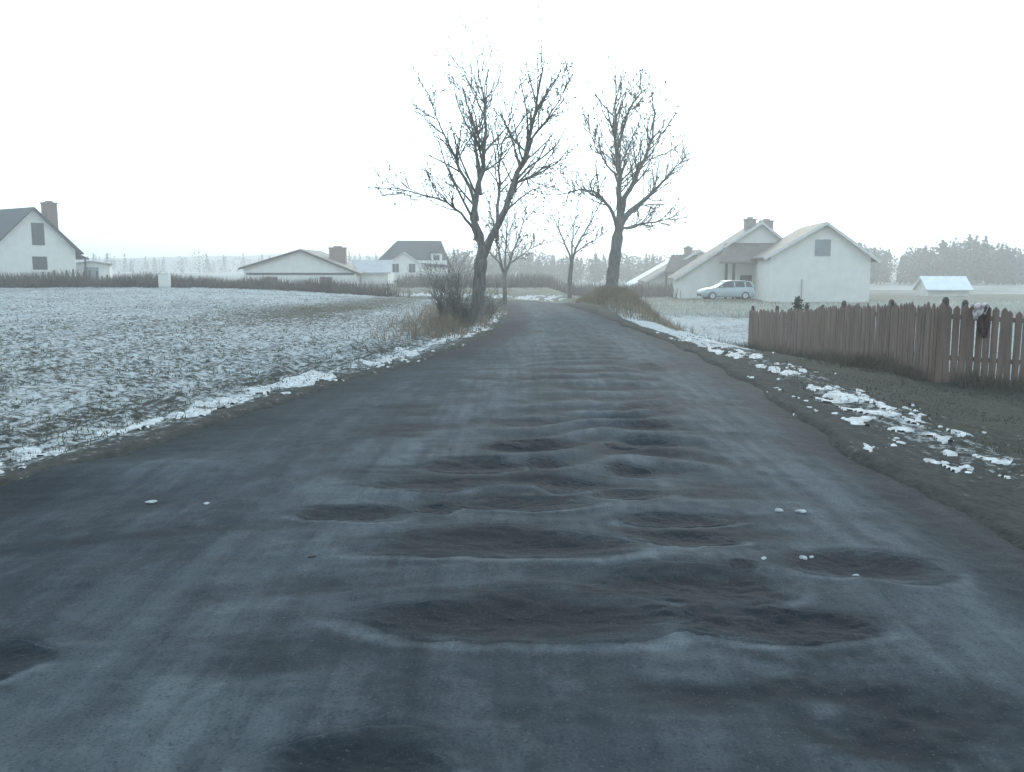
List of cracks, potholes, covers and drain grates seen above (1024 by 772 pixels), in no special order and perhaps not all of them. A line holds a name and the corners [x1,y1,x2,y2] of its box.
pothole [536,479,608,495]
pothole [618,531,740,548]
pothole [604,436,683,451]
pothole [426,454,526,474]
pothole [245,724,455,772]
pothole [334,587,691,645]
pothole [788,549,956,586]
pothole [481,438,578,453]
pothole [358,477,495,493]
pothole [601,463,661,479]
pothole [616,513,735,528]
pothole [296,505,415,523]
